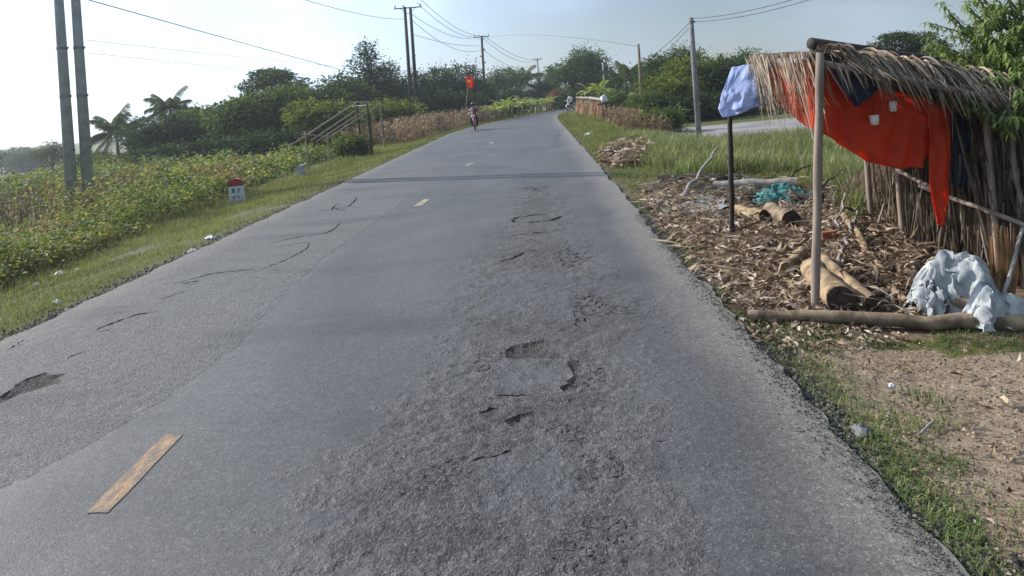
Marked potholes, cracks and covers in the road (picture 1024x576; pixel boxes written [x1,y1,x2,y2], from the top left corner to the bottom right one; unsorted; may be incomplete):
crack [96,197,357,332]
crack [425,450,512,487]
pothole [559,359,583,392]
crack [497,214,593,267]
pothole [0,372,67,404]
pothole [503,412,535,428]
pothole [504,339,565,360]
